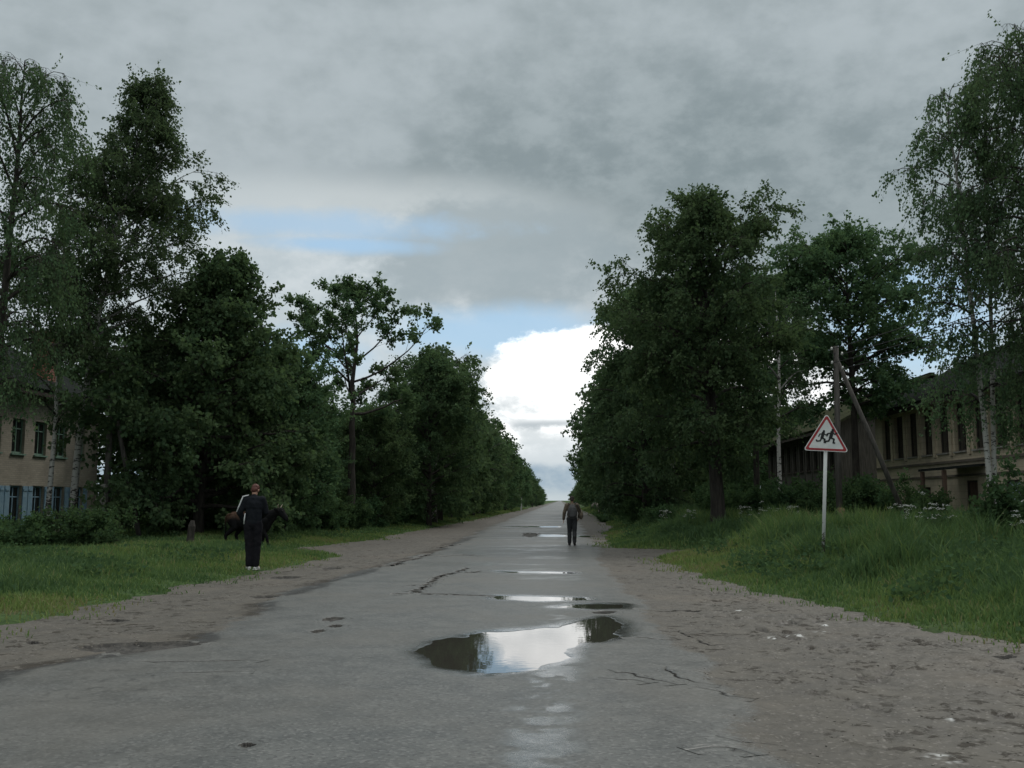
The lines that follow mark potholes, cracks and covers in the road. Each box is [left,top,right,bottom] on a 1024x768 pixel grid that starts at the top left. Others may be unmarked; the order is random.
crack [593,666,759,702]
crack [676,734,786,757]
crack [362,544,494,597]
